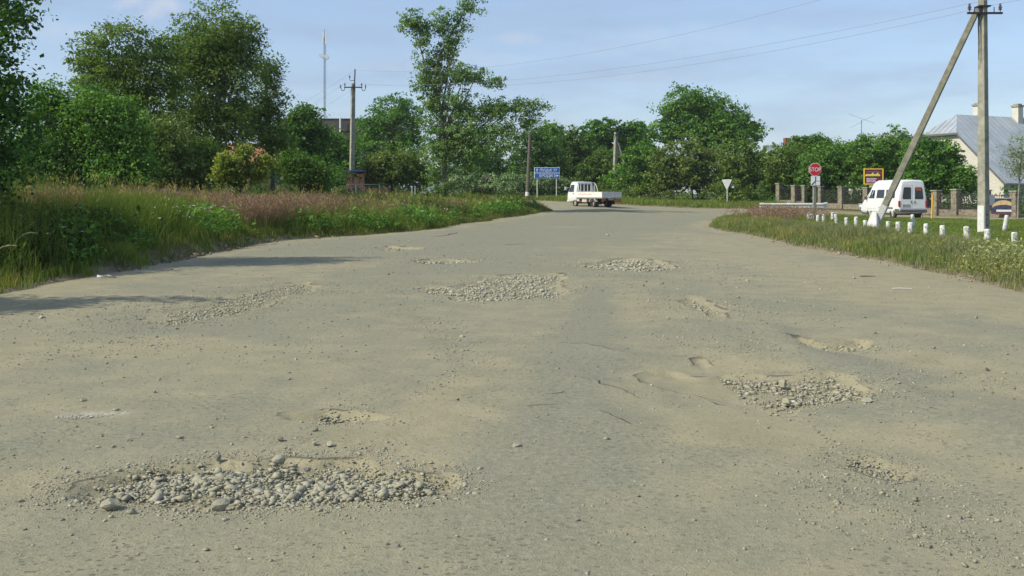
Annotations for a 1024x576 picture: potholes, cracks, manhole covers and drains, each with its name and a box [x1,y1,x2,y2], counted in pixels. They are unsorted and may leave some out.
pothole [61,455,461,512]
pothole [414,273,573,301]
pothole [633,370,876,416]
pothole [573,258,678,272]
pothole [678,295,732,319]
pothole [831,452,921,484]
pothole [785,333,874,352]
pothole [142,281,323,326]
pothole [274,408,392,425]
crack [529,376,645,406]
